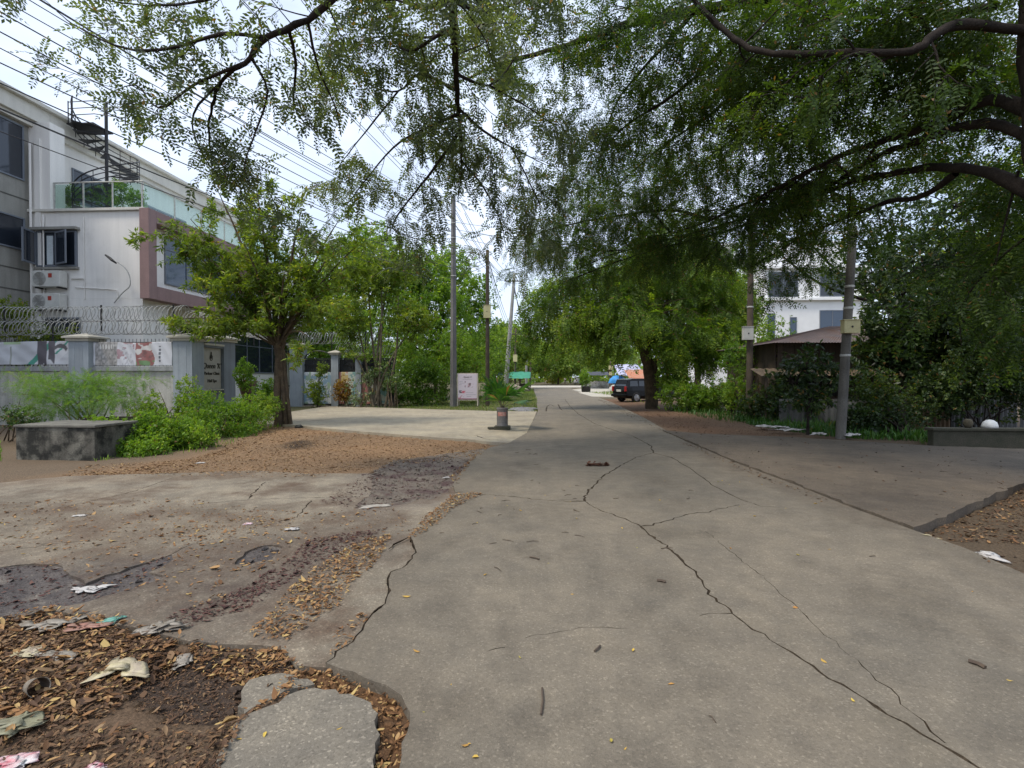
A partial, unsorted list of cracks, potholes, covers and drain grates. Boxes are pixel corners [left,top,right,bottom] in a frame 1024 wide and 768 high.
pothole [235,545,281,567]
crack [326,537,417,663]
crack [483,399,980,768]
